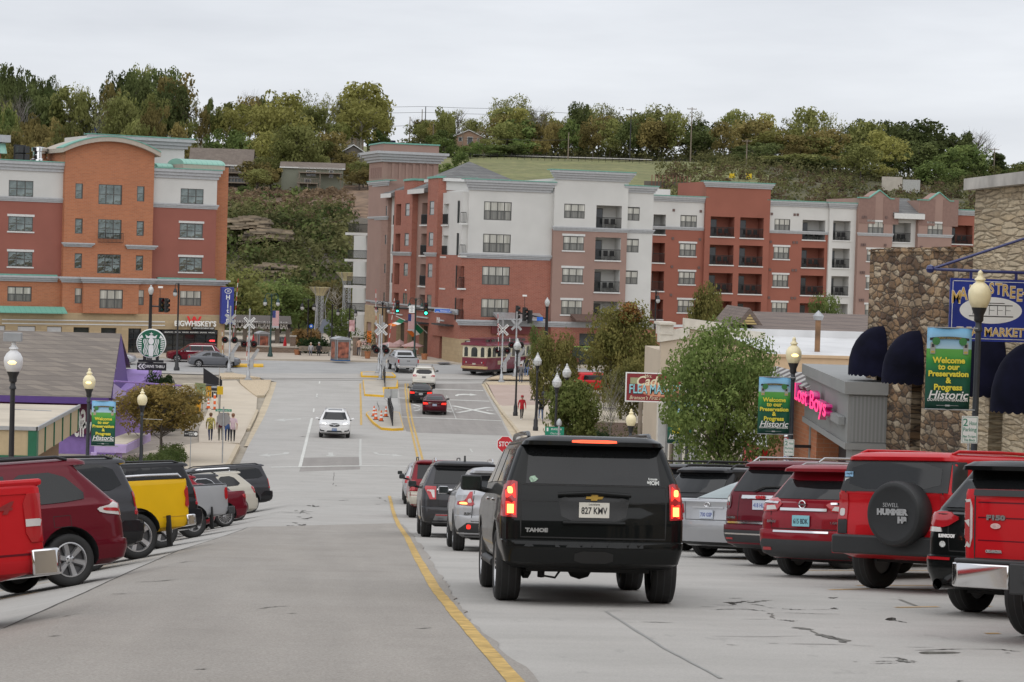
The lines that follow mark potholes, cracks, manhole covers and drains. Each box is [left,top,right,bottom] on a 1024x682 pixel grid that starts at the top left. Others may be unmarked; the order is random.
crack [704,600,836,637]
crack [287,505,319,526]
